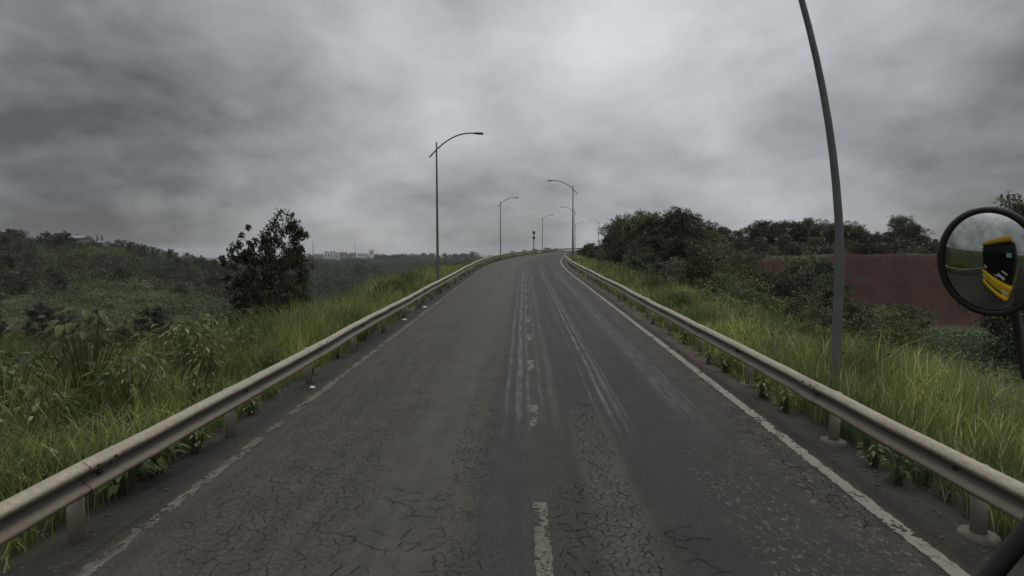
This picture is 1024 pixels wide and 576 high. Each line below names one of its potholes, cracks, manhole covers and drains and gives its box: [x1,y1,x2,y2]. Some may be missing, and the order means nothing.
crack [160,324,506,576]
crack [554,400,730,576]
crack [711,405,884,531]
